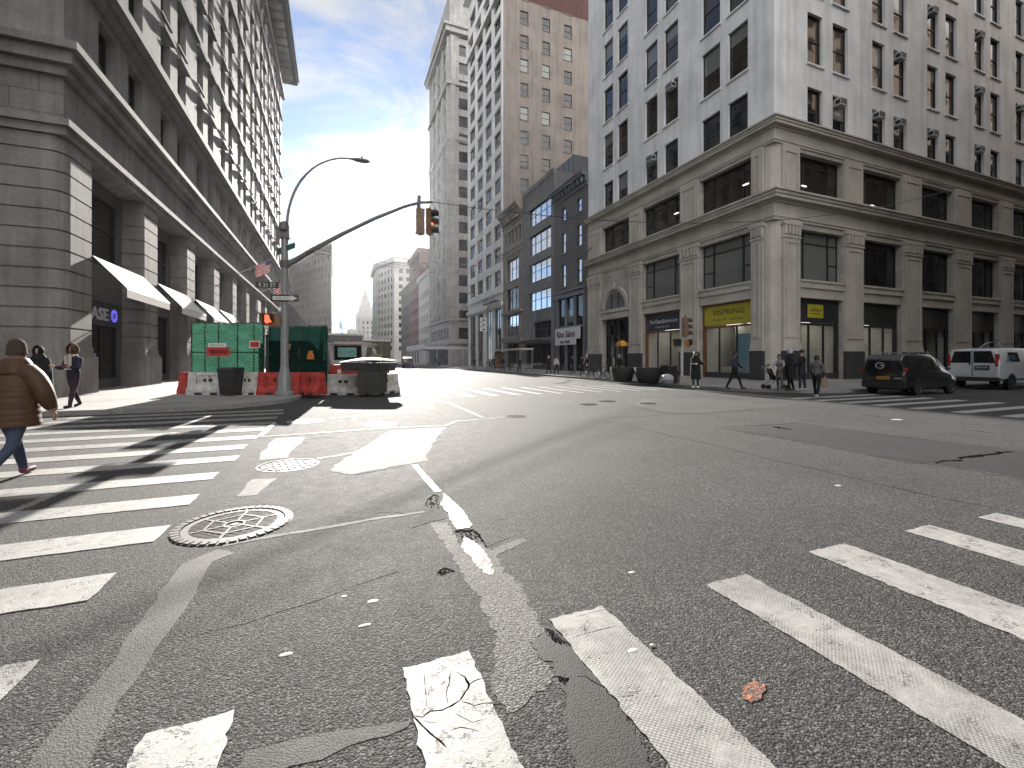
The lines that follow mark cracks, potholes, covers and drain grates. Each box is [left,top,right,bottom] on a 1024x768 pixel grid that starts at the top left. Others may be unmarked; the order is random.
crack [412,675,498,745]
pothole [546,628,569,647]
pothole [455,529,483,542]
manhole cover [255,458,319,472]
pothole [425,494,439,510]
crack [204,569,409,634]
manhole cover [168,505,293,546]
